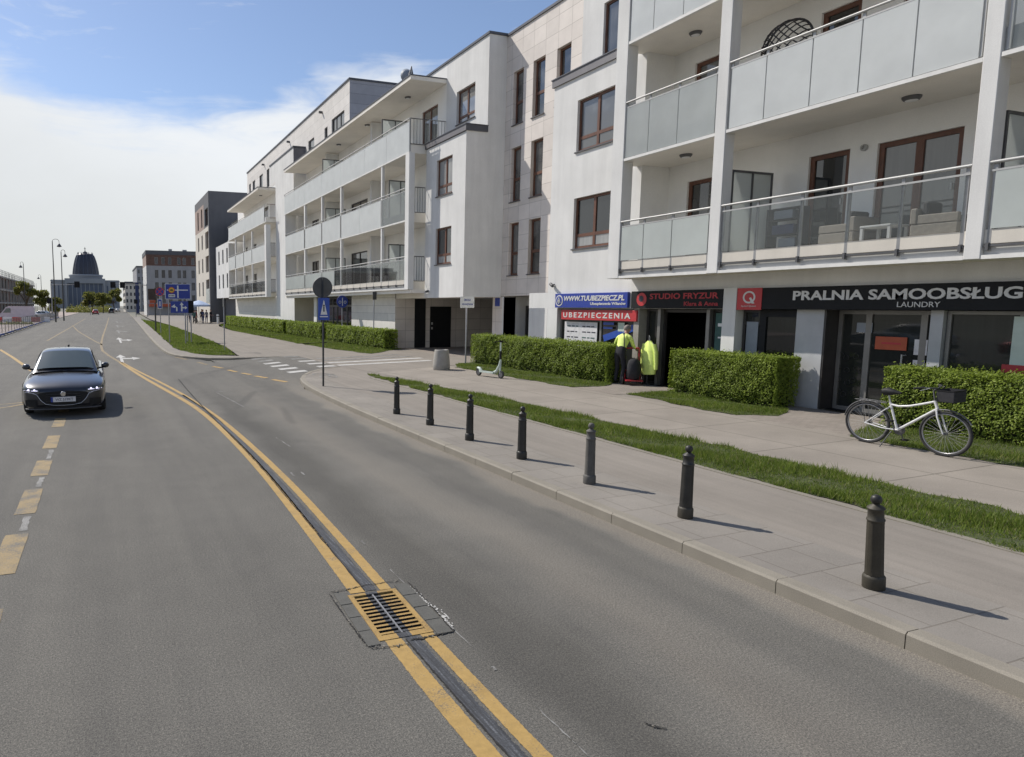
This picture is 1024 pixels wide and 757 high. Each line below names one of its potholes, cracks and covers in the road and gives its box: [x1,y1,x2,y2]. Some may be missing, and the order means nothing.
drain grate [334,583,452,647]
